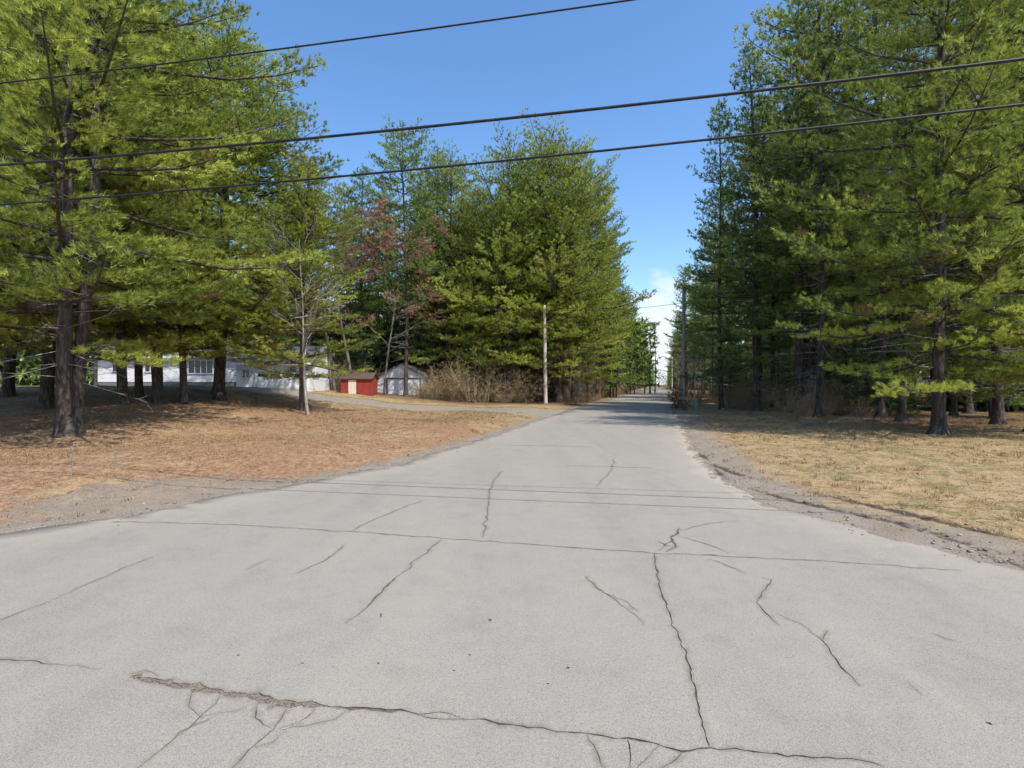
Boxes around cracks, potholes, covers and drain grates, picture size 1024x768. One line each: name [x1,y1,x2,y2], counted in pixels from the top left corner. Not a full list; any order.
crack [0,659,88,668]
crack [115,472,942,768]
